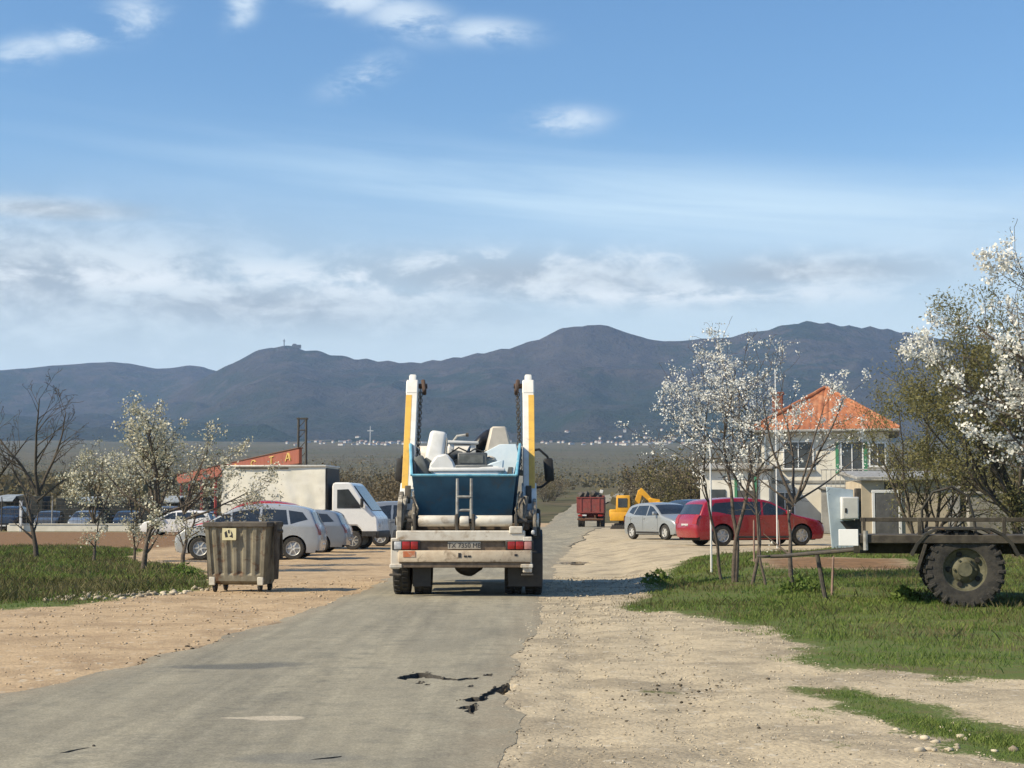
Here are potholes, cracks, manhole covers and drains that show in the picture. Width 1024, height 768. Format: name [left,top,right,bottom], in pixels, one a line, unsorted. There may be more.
pothole [397,672,479,681]
